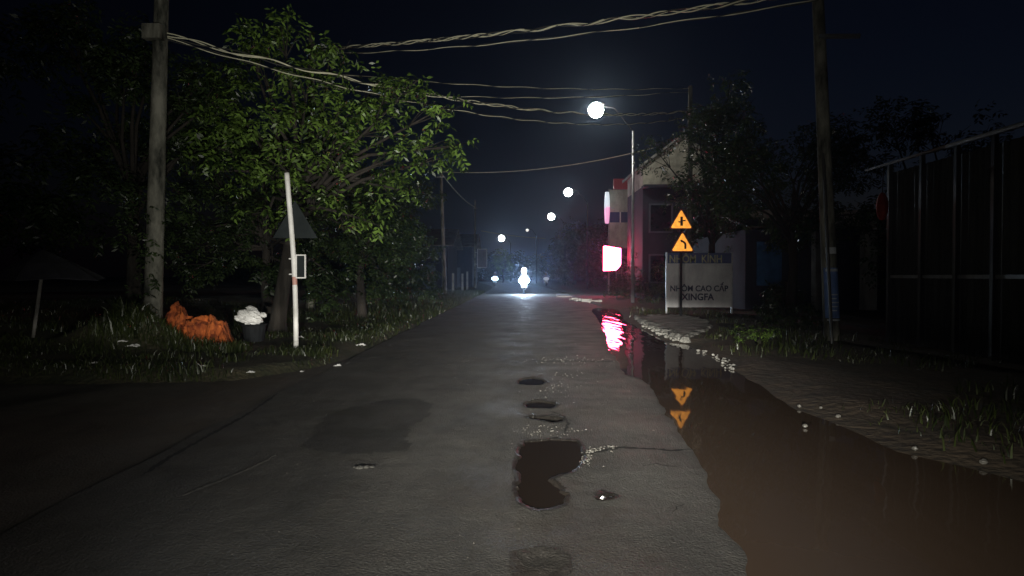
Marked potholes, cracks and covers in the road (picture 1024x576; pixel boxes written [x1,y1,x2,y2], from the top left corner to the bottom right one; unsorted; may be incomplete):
pothole [512,438,587,511]
crack [141,393,277,476]
pothole [594,490,621,501]
pothole [521,400,561,408]
crack [590,447,695,467]
pothole [523,413,565,423]
pothole [516,377,549,385]
